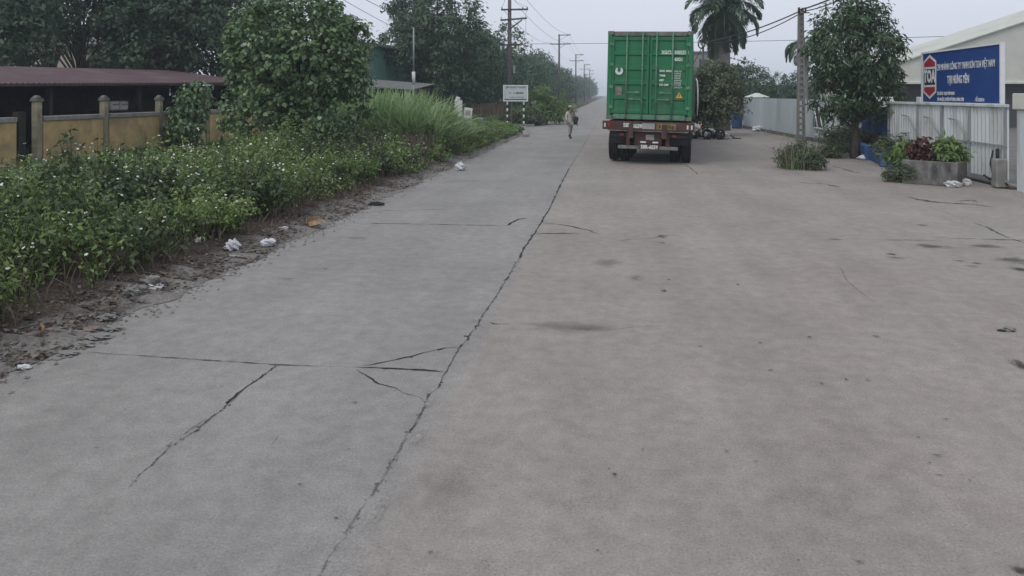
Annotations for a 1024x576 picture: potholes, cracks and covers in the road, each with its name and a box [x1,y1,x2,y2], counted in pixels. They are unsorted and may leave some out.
crack [910,197,1019,241]
crack [135,366,276,480]
crack [358,347,451,399]
